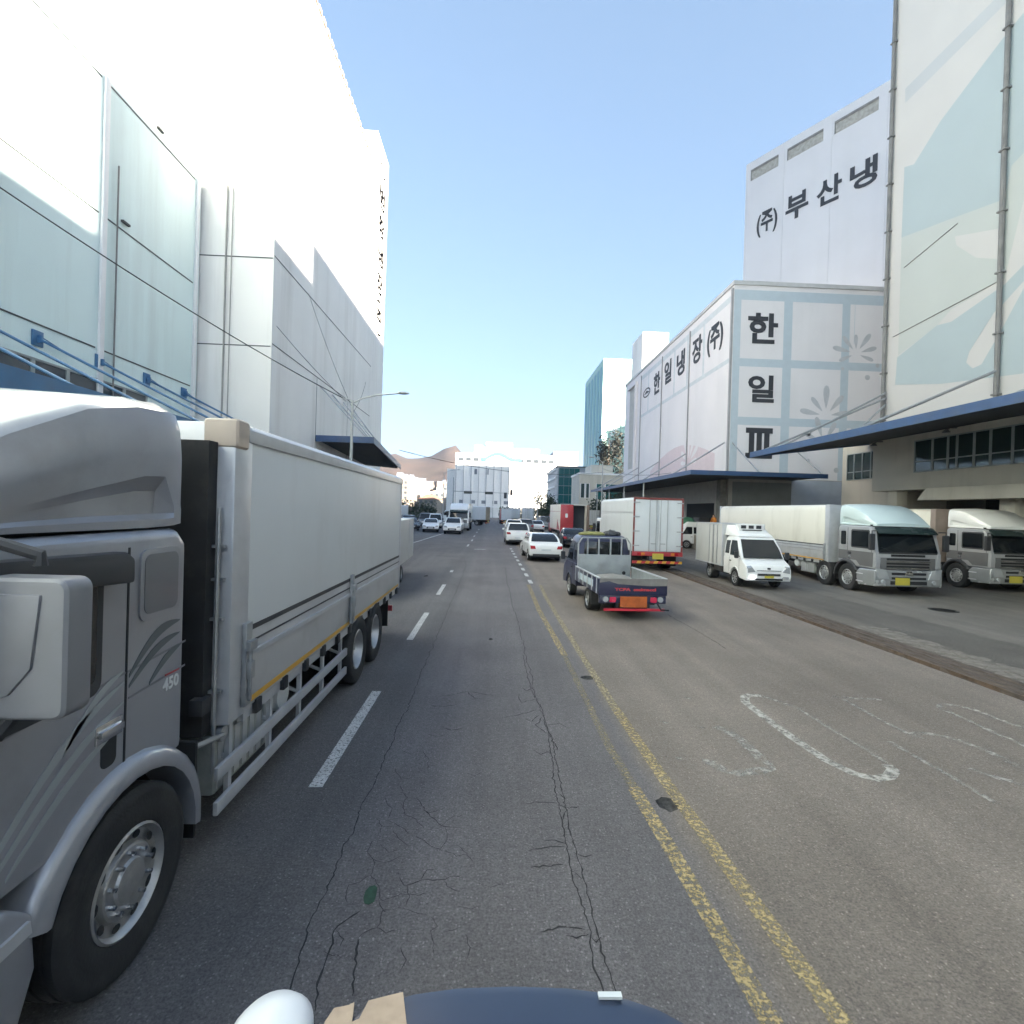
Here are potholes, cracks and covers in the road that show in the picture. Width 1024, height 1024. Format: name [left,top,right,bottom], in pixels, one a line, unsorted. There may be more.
pothole [655,797,681,812]
crack [289,560,503,1011]
crack [503,568,616,991]
